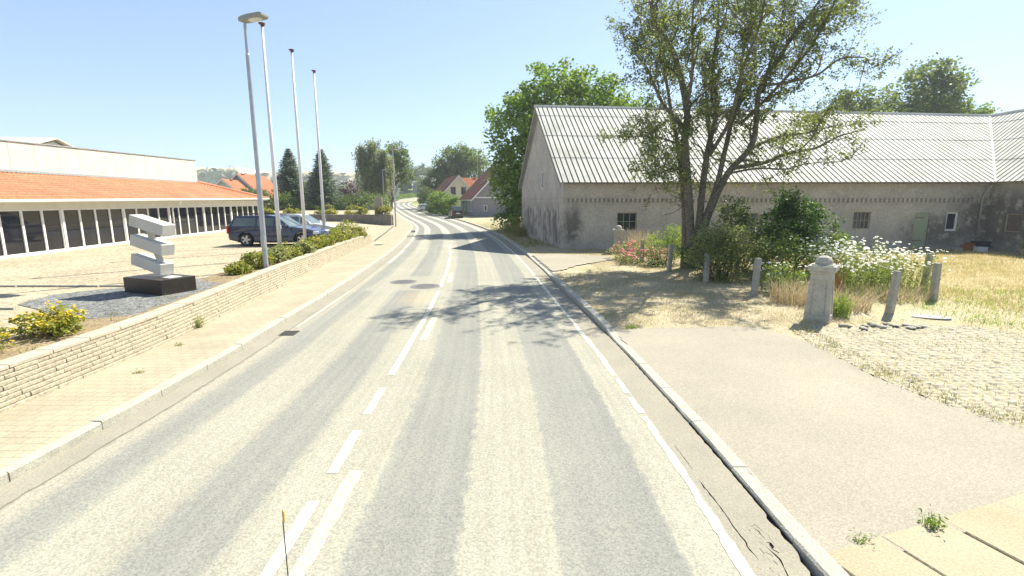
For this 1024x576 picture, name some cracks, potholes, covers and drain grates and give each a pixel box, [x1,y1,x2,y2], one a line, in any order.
crack [675,446,788,576]
